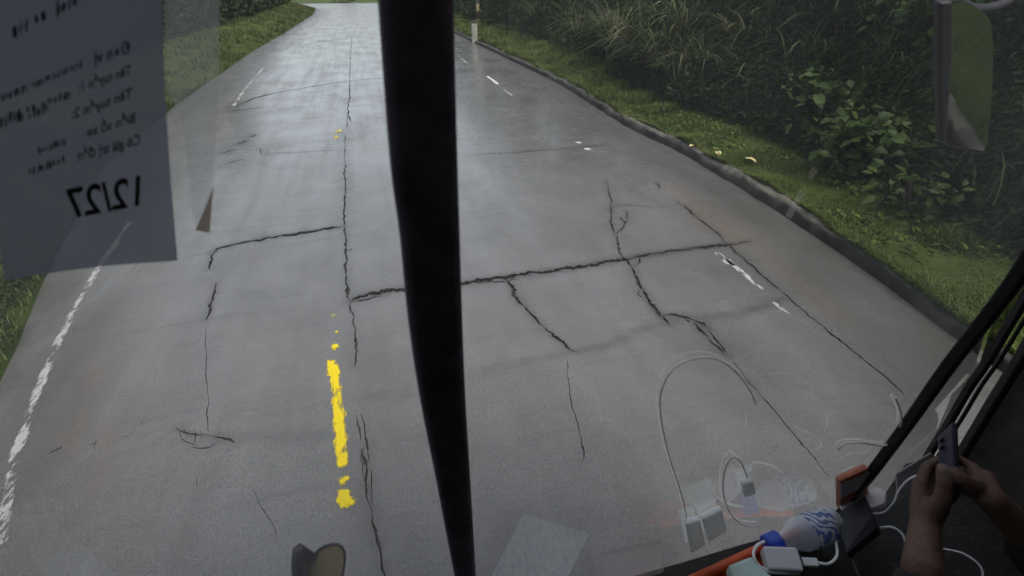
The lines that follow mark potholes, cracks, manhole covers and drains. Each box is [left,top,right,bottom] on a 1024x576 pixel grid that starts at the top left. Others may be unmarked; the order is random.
crack [176,39,905,483]
crack [356,413,386,576]
